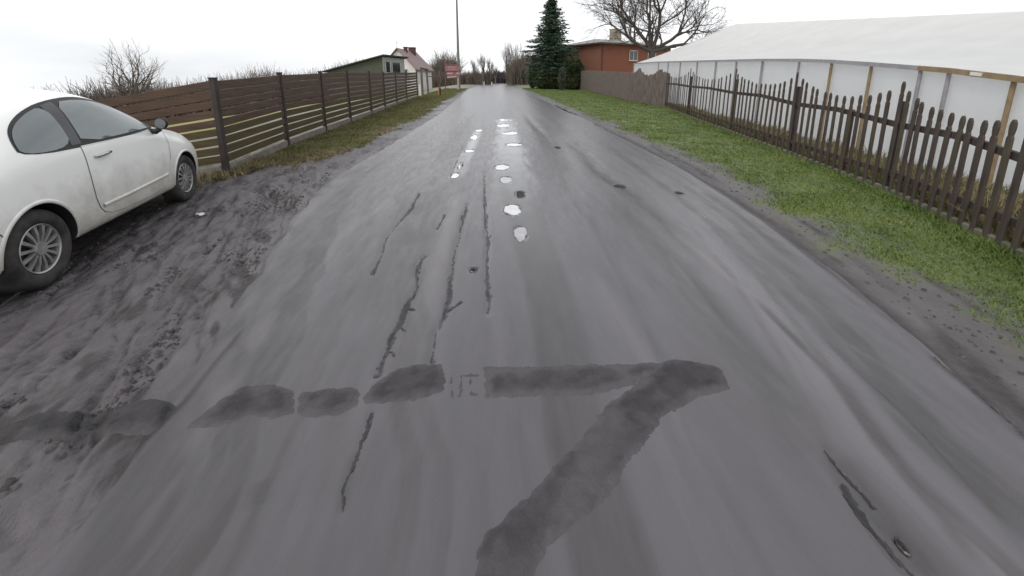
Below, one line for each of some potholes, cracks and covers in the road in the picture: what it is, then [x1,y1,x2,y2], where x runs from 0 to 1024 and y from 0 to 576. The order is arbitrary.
crack [341,412,374,513]
pothole [894,537,911,557]
pothole [513,226,528,243]
pothole [502,203,523,217]
crack [823,450,914,576]
crack [370,174,493,378]
